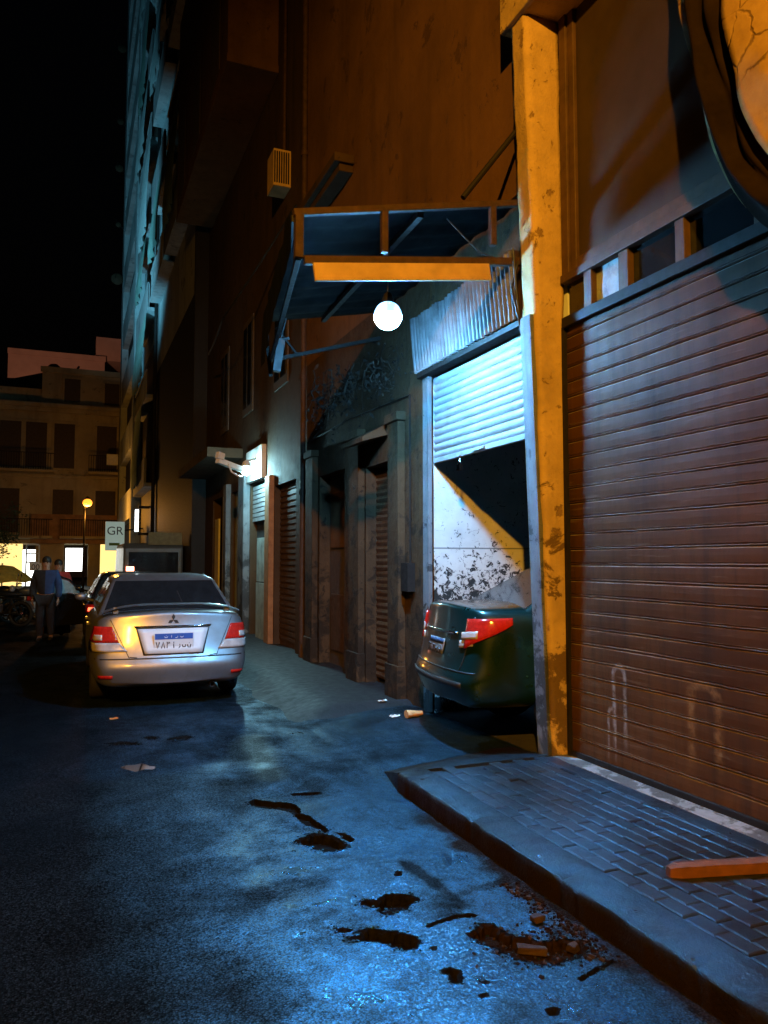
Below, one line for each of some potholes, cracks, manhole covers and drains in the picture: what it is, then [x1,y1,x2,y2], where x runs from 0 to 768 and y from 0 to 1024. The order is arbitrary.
pothole [342,925,425,953]
pothole [443,968,462,983]
pothole [286,831,352,854]
pothole [466,921,590,969]
pothole [354,890,424,917]
